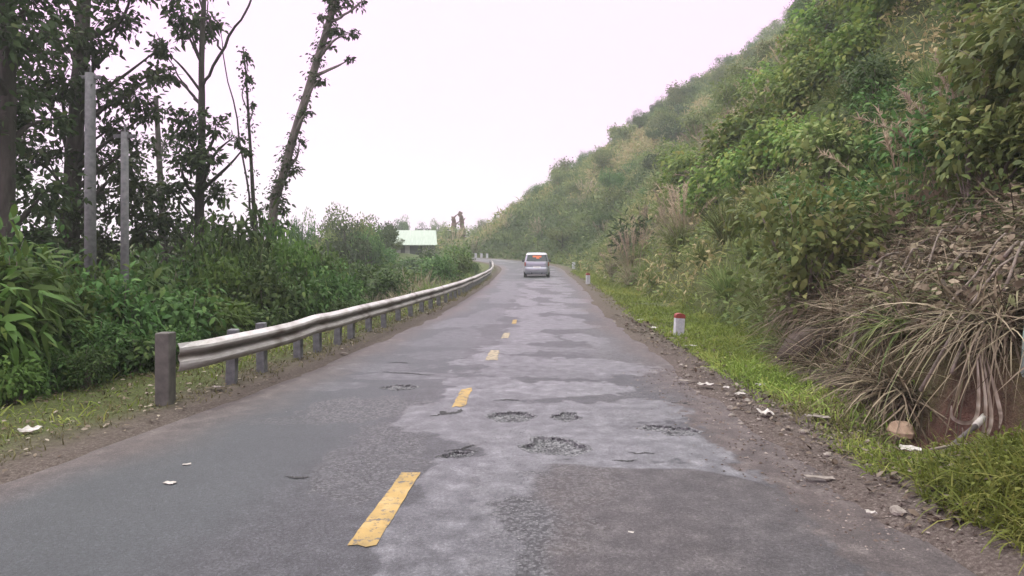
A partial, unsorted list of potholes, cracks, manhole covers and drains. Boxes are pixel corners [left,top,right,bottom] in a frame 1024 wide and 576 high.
pothole [518,436,593,457]
pothole [434,450,475,458]
pothole [484,411,538,423]
pothole [550,412,583,422]
pothole [637,424,706,437]
